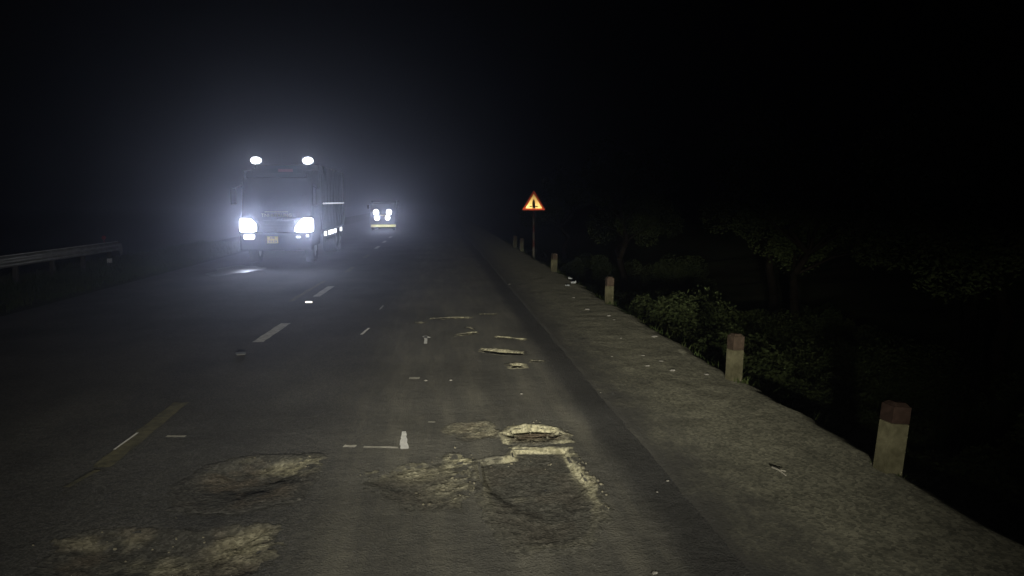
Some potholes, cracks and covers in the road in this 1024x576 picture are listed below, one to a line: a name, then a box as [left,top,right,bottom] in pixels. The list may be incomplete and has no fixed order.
pothole [498,420,576,446]
pothole [360,447,478,511]
pothole [165,452,328,514]
pothole [25,517,287,576]
pothole [478,347,529,356]
